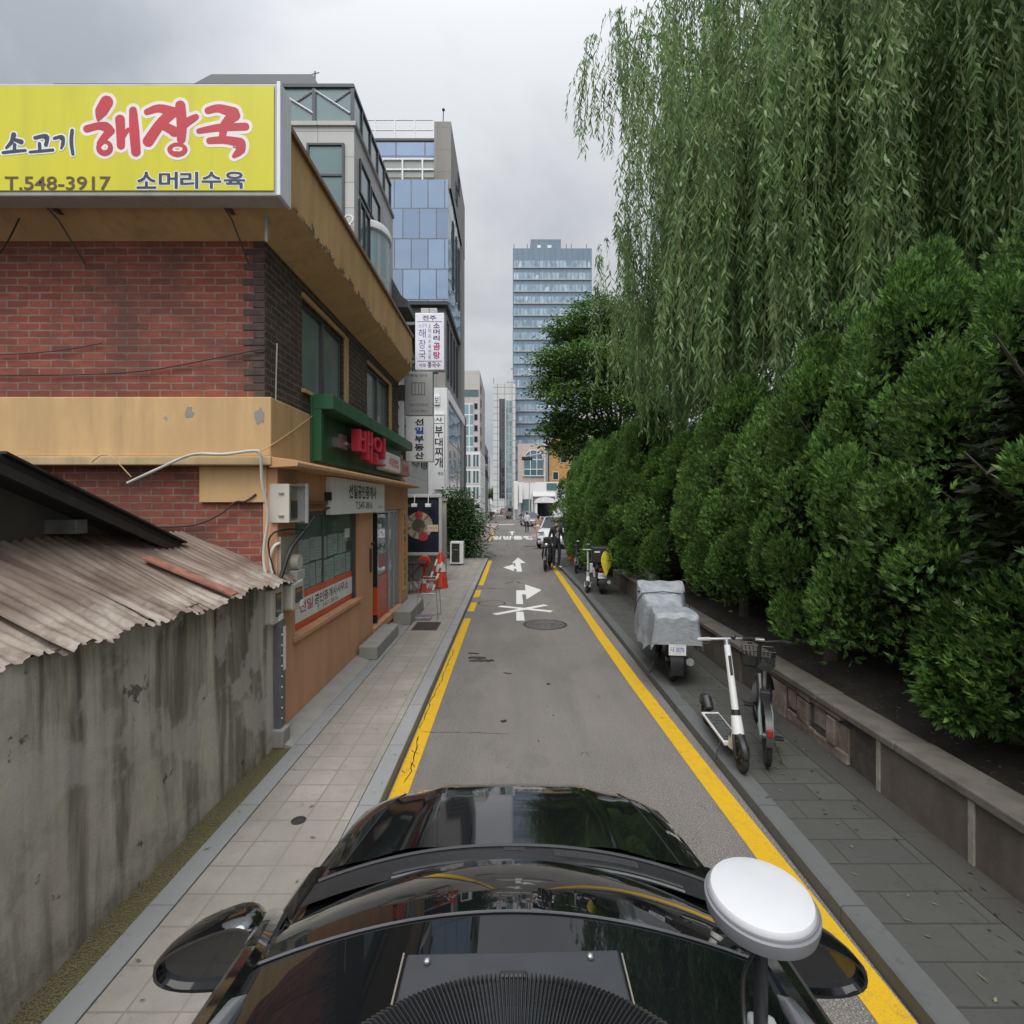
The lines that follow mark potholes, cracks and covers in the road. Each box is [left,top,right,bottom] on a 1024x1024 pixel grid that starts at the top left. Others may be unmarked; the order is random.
crack [402,654,500,781]
drain grate [411,622,441,630]
manhole cover [523,619,567,630]
